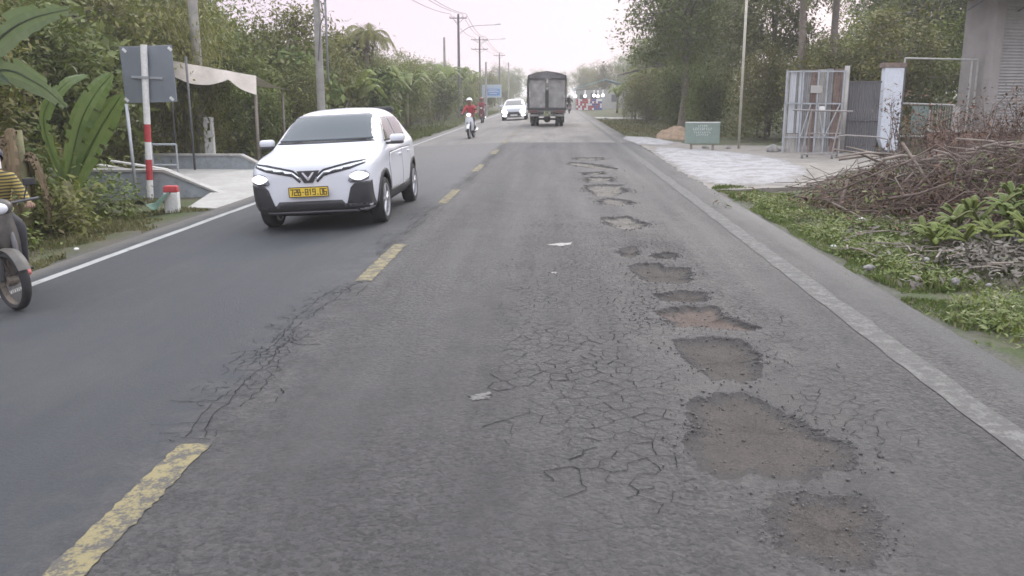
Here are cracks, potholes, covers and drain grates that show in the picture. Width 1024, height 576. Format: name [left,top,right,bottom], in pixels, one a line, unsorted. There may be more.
pothole [650,289,713,304]
pothole [625,262,697,285]
pothole [583,184,630,197]
pothole [568,162,619,170]
pothole [595,198,637,206]
pothole [669,335,768,385]
pothole [599,215,652,230]
pothole [754,490,892,575]
pothole [645,251,683,260]
pothole [676,391,864,486]
crack [482,212,919,514]
pothole [616,246,642,259]
